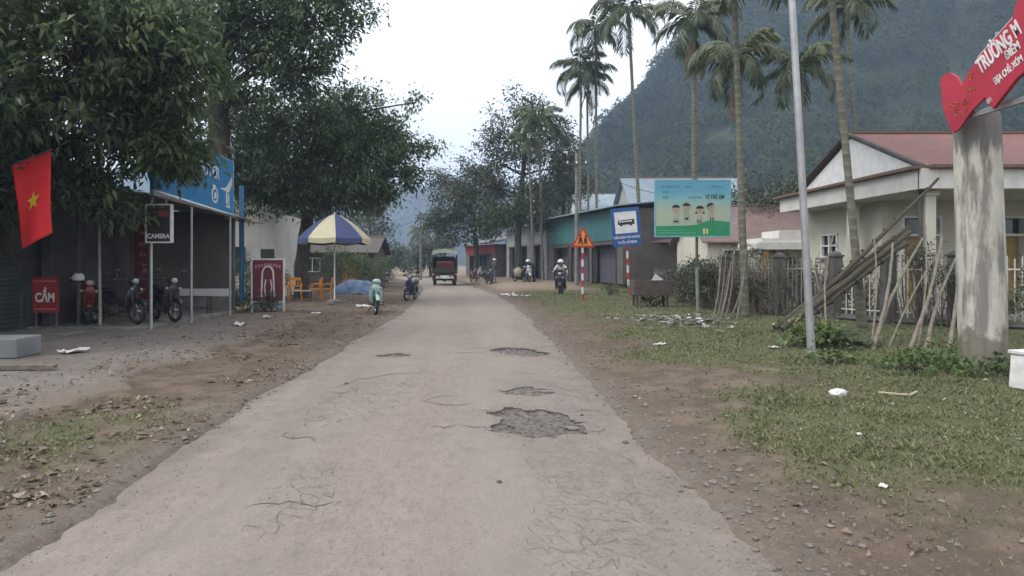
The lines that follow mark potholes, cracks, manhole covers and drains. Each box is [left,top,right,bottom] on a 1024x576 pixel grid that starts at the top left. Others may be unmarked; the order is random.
pothole [492,385,565,400]
crack [242,372,494,534]
crack [513,439,675,576]
pothole [484,346,554,357]
pothole [473,402,593,445]
